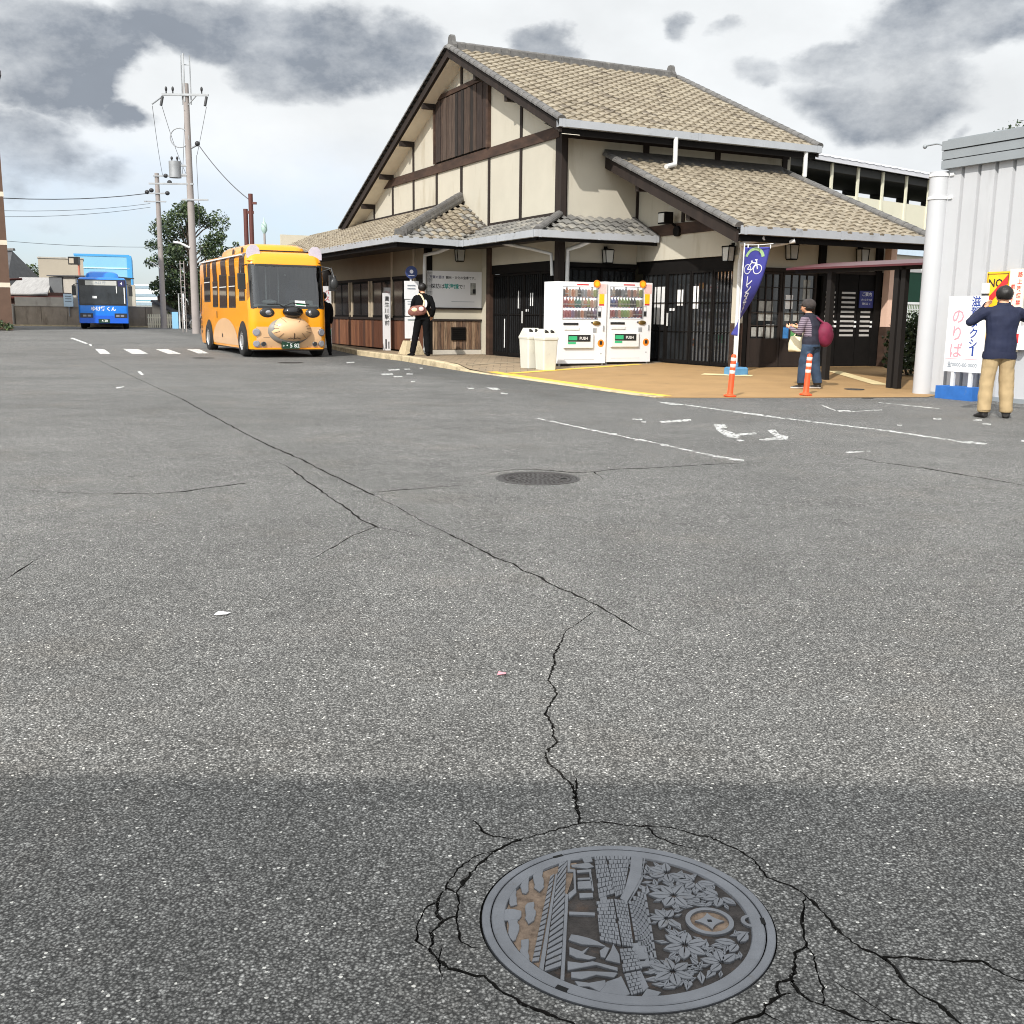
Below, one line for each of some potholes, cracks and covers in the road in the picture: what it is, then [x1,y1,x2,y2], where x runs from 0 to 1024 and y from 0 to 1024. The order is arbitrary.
crack [24,366,1024,1024]
manhole cover [495,472,580,485]
manhole cover [479,846,777,1015]
